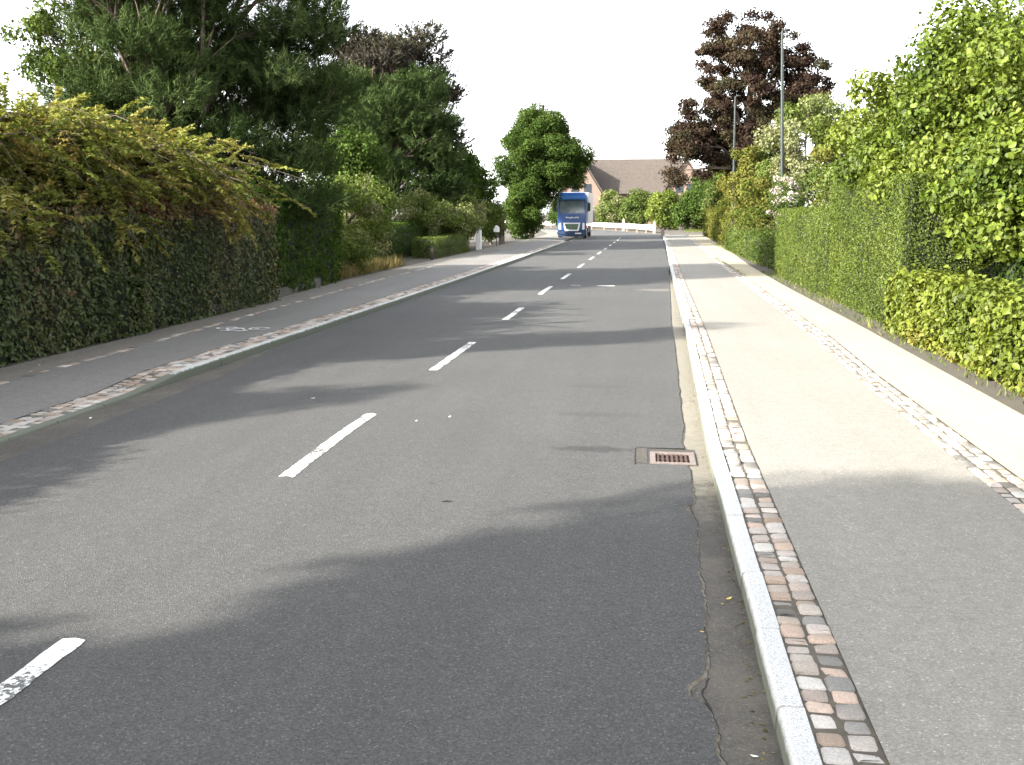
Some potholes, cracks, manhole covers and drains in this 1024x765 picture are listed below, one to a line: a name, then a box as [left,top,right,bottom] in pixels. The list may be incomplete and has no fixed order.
drain grate [650,451,697,465]
crack [669,277,728,765]
